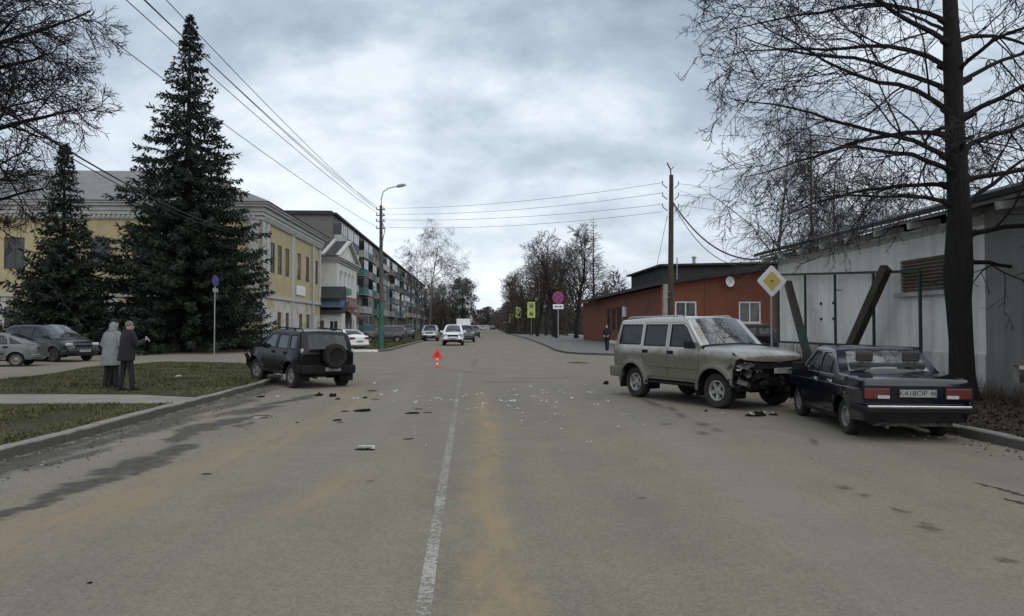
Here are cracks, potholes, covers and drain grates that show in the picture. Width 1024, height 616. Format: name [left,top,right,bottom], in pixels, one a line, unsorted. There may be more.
crack [974,482,1024,504]
